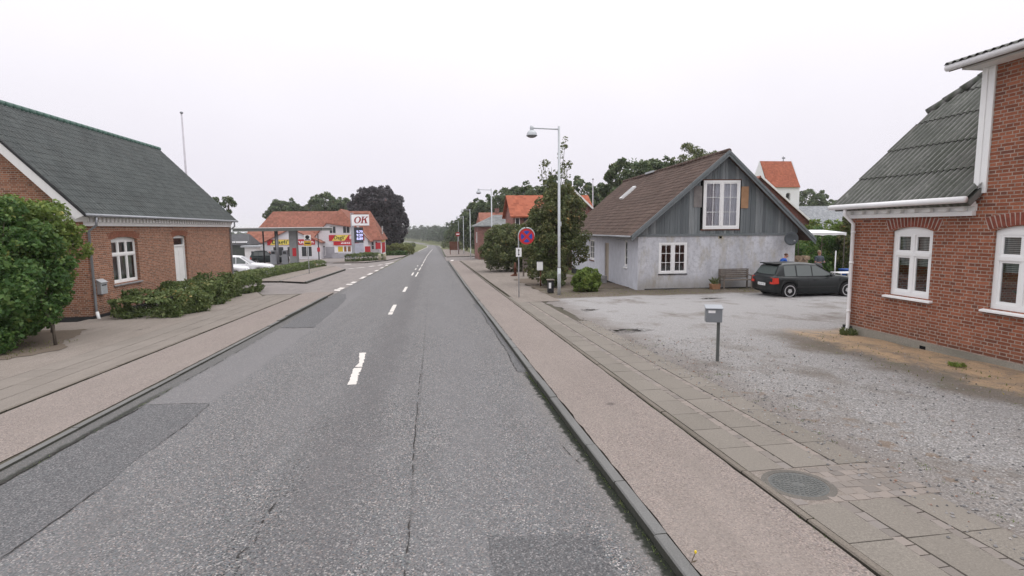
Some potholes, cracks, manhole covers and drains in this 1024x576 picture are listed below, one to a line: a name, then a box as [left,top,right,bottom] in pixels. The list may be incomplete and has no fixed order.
manhole cover [761,470,838,500]
crack [0,332,272,558]
crack [404,374,421,576]
